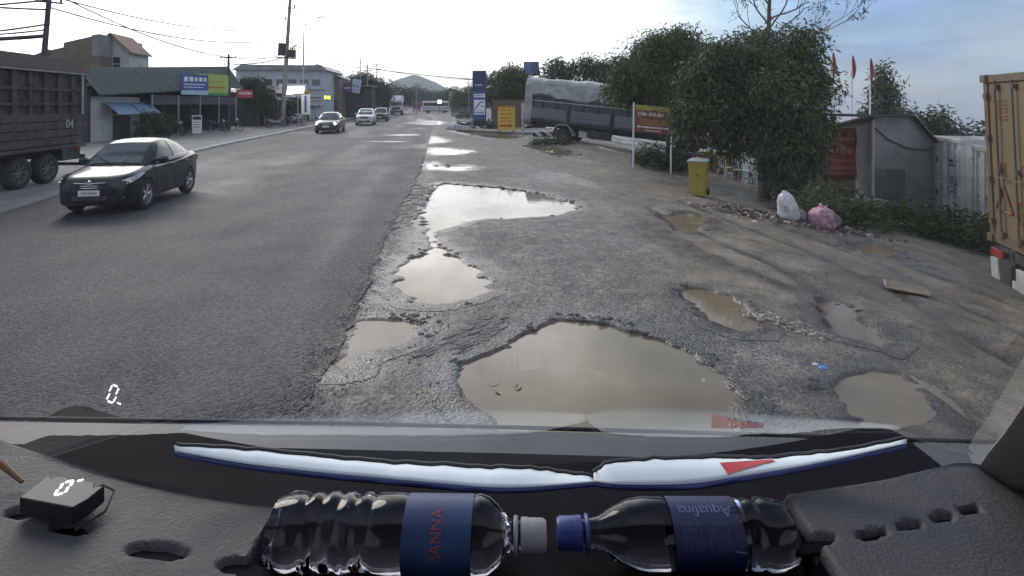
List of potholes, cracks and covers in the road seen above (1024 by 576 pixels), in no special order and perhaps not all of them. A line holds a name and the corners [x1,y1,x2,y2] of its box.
crack [412,315,513,358]
pothole [318,311,442,385]
pothole [429,312,776,439]
pothole [647,210,721,235]
pothole [372,182,589,311]
pothole [802,357,995,445]
pothole [795,289,919,359]
pothole [664,282,786,341]
pothole [824,233,921,266]
